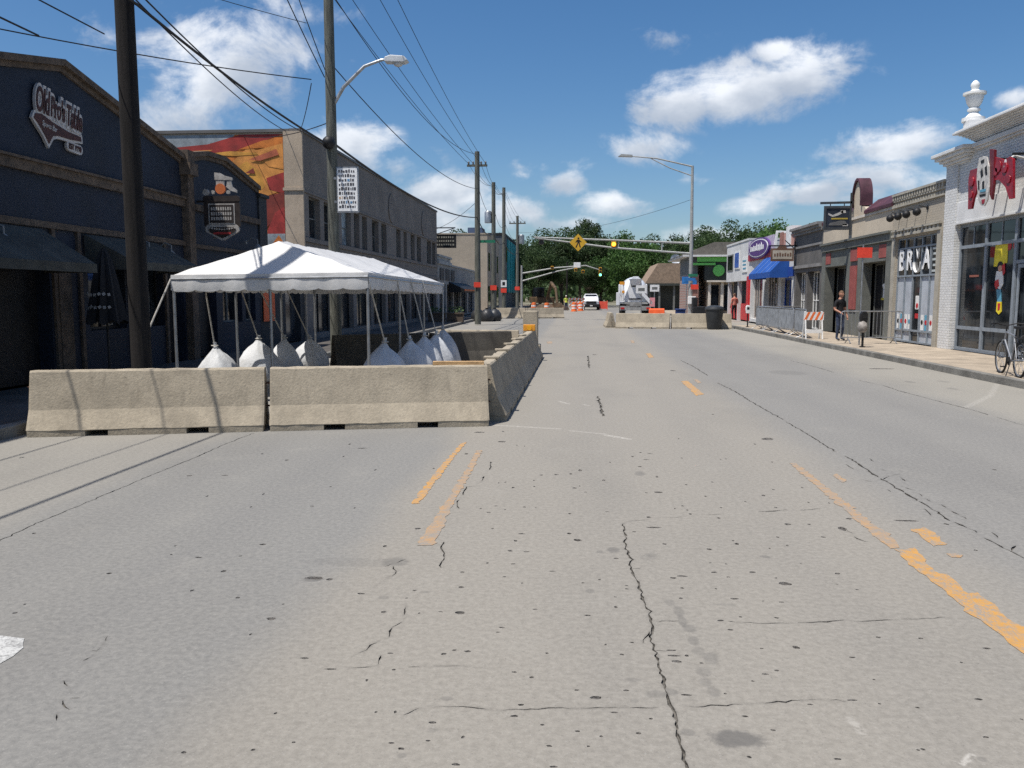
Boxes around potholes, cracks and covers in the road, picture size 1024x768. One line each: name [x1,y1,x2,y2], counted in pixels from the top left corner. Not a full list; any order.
crack [405,509,841,768]
crack [683,361,1024,558]
crack [327,607,419,670]
crack [439,462,492,567]
